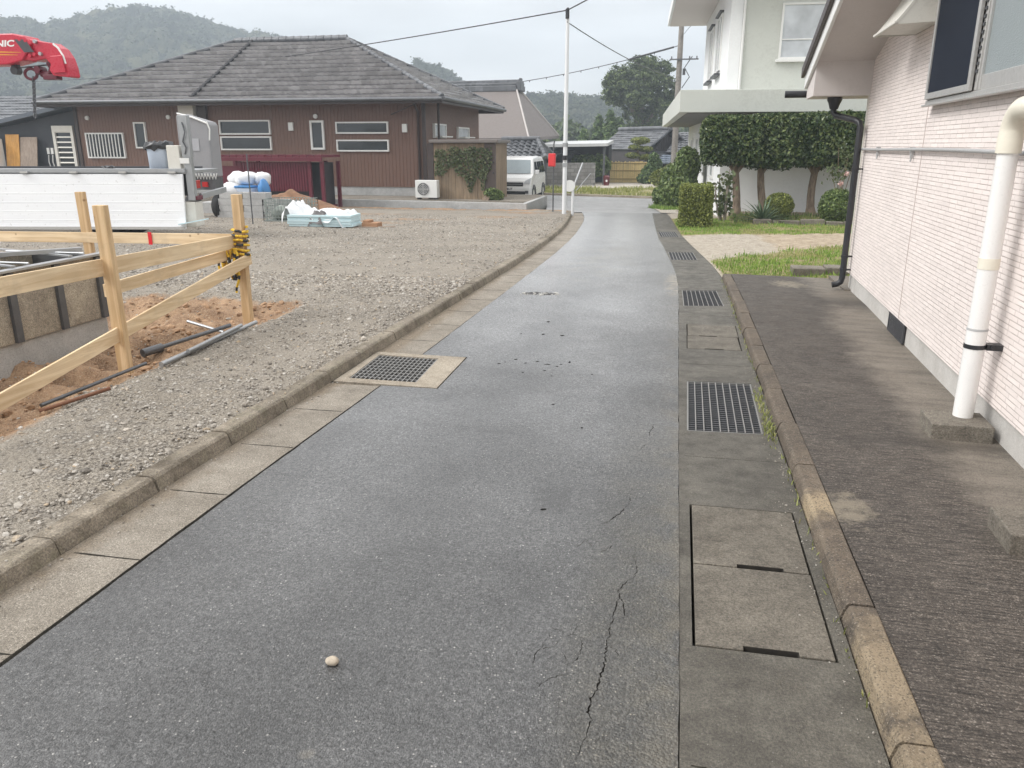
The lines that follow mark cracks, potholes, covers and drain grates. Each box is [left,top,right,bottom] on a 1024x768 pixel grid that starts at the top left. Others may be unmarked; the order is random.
drain grate [687,381,763,435]
drain grate [668,252,697,260]
drain grate [682,290,724,306]
crack [533,496,637,764]
